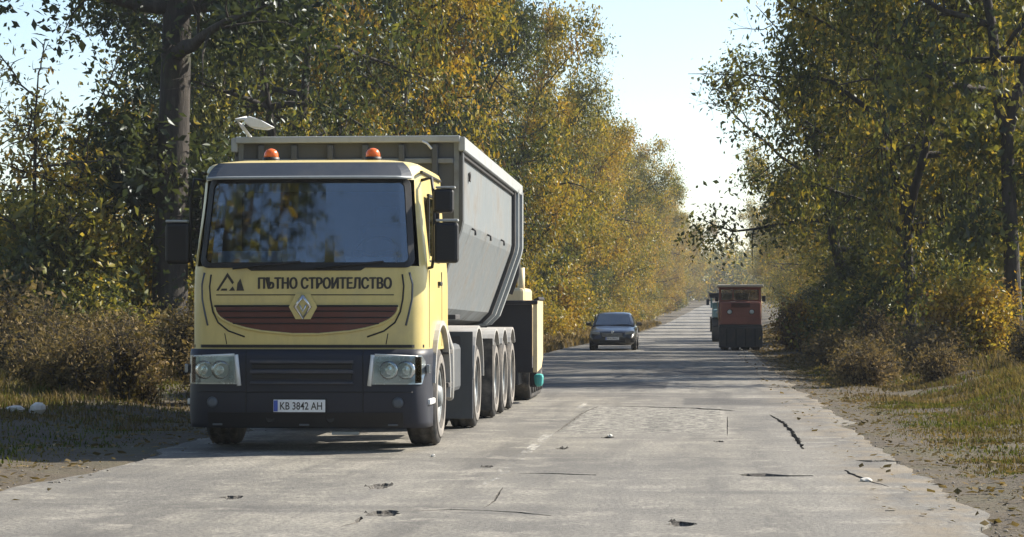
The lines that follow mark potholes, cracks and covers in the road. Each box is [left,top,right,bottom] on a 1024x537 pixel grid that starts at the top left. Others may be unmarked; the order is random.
crack [770,415,804,449]
pothole [364,482,393,490]
crack [844,460,901,487]
crack [341,487,550,527]
pothole [666,519,696,527]
